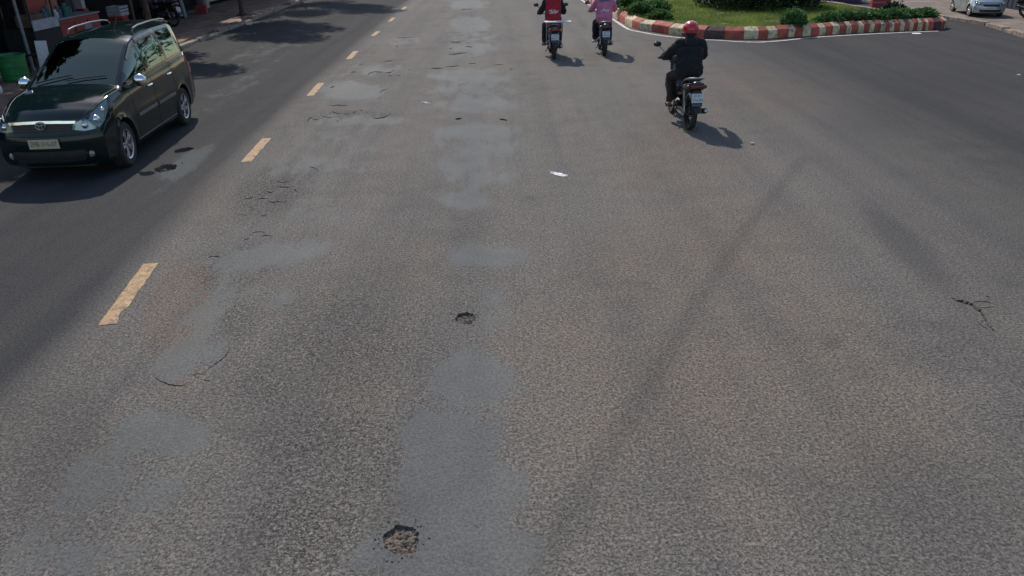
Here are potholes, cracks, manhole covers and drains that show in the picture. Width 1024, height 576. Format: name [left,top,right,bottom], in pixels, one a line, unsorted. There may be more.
crack [952,296,996,332]
pothole [373,519,430,563]
pothole [150,162,183,173]
pothole [449,311,480,326]
crack [307,105,388,122]
crack [155,348,230,390]
